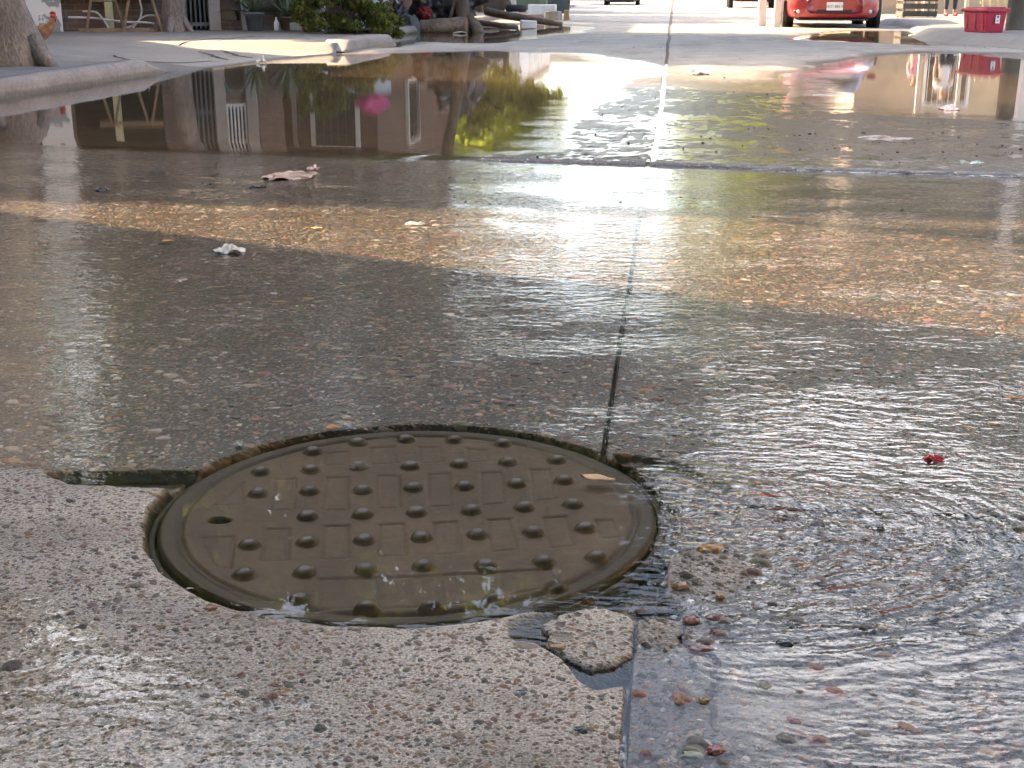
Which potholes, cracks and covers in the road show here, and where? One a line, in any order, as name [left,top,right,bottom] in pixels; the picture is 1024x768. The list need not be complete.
manhole cover [148,431,666,629]
